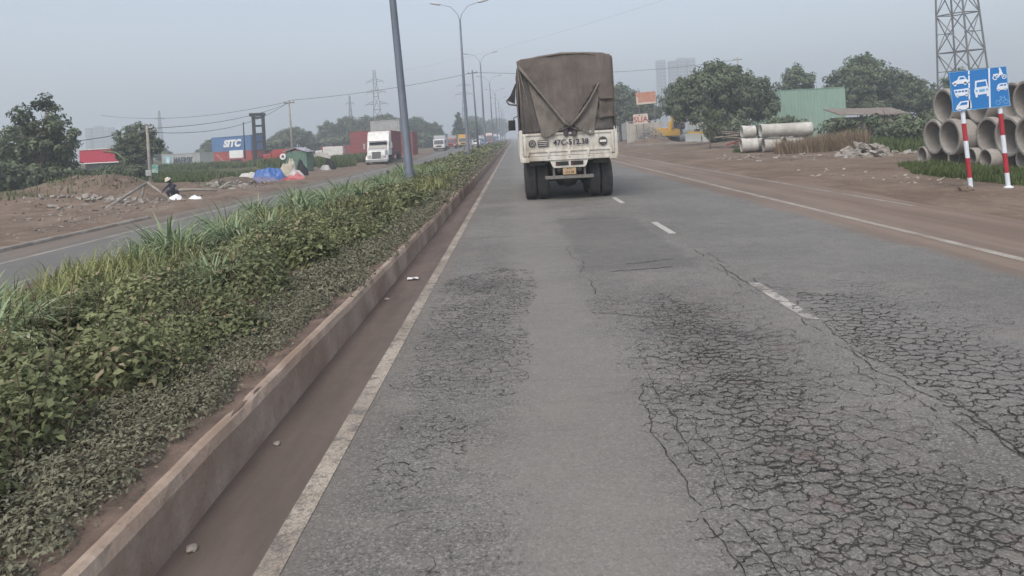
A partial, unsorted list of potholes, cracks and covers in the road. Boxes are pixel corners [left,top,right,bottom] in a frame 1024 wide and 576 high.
crack [588,289,1024,576]
crack [566,246,673,294]
crack [352,268,539,499]
crack [693,249,773,294]
